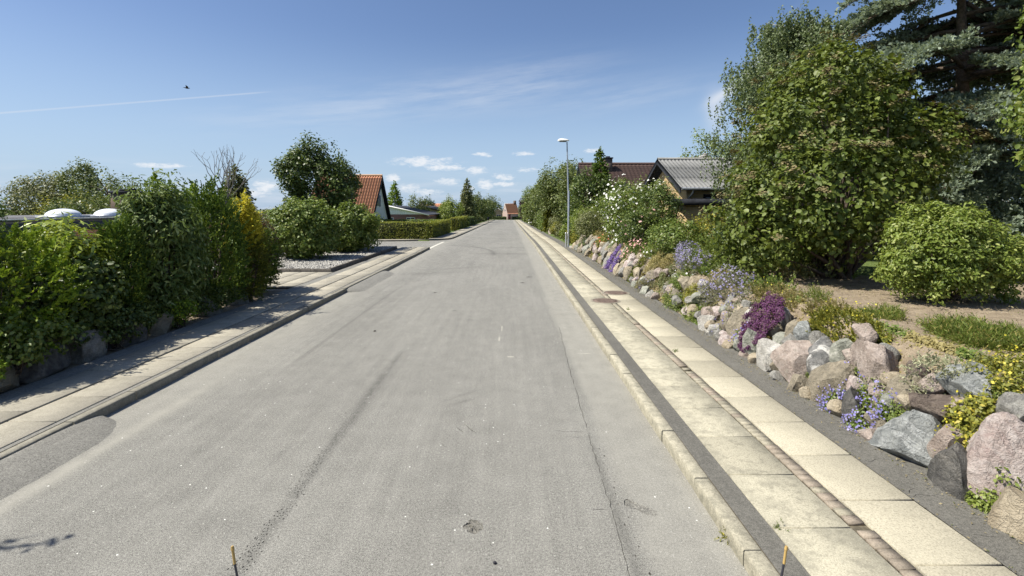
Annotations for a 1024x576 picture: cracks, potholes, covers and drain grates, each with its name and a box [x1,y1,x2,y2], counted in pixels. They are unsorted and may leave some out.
pothole [463,519,484,534]
